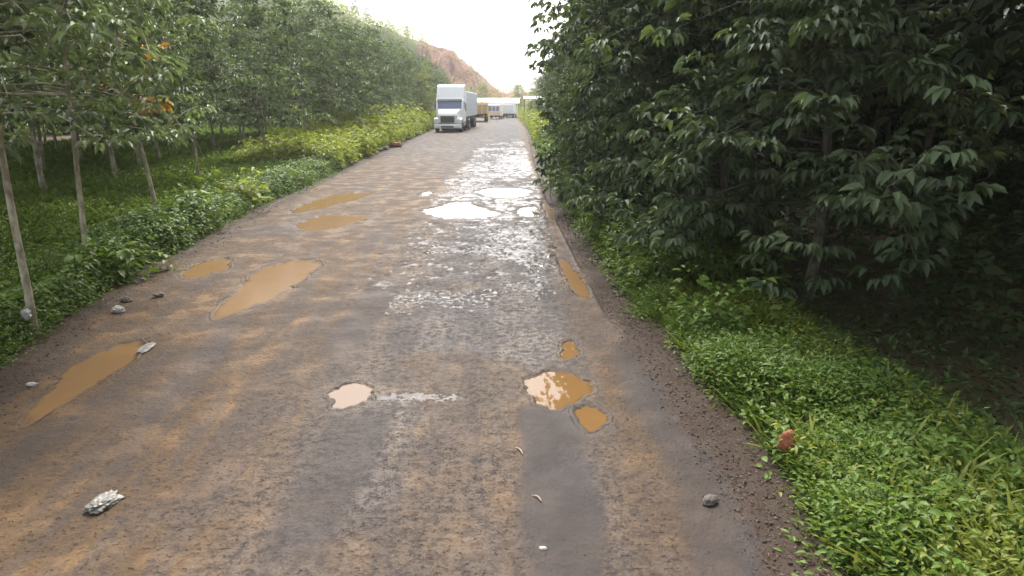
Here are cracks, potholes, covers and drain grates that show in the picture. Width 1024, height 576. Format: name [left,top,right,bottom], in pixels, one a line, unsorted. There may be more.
pothole [509,205,547,218]
pothole [470,186,539,199]
pothole [12,337,149,430]
pothole [208,257,327,322]
pothole [518,368,600,414]
pothole [174,256,237,280]
pothole [569,402,614,434]
pothole [416,200,507,221]
pothole [288,213,378,233]
pothole [322,379,380,411]
pothole [557,256,593,300]
pothole [557,338,585,362]
